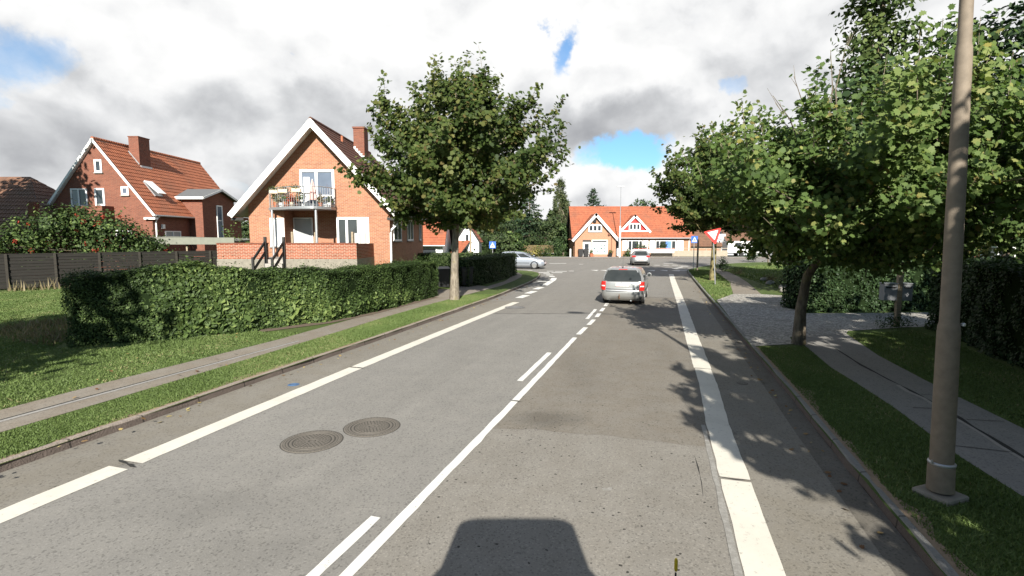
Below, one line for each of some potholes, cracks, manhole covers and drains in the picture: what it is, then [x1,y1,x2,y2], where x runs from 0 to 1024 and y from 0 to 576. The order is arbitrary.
manhole cover [279,430,344,454]
manhole cover [343,417,401,437]
